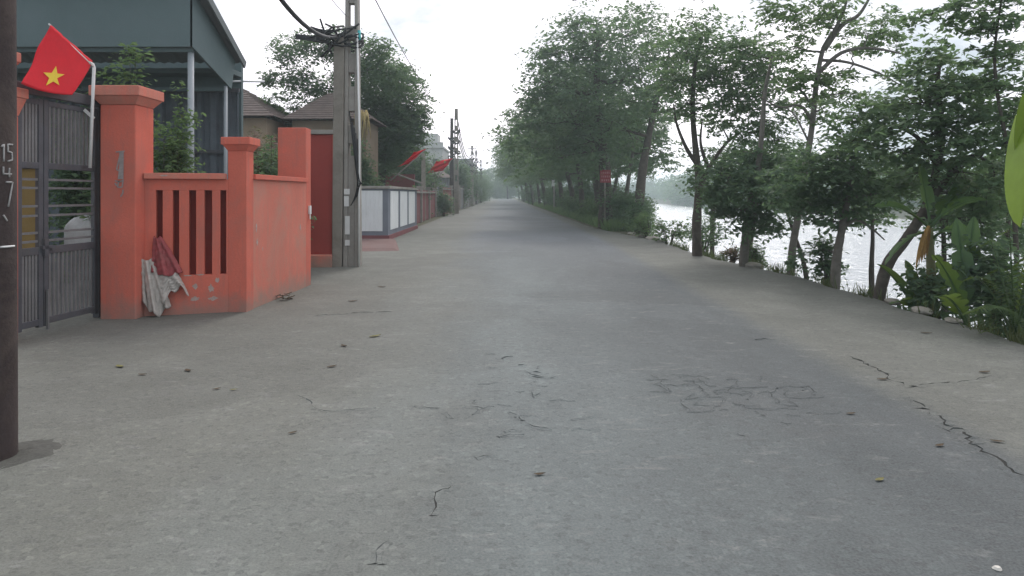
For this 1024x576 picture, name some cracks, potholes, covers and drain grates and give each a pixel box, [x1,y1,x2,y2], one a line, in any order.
crack [472,353,602,460]
crack [295,394,376,413]
crack [428,485,460,516]
crack [845,356,1024,480]
crack [367,535,394,565]
crack [646,374,842,436]
